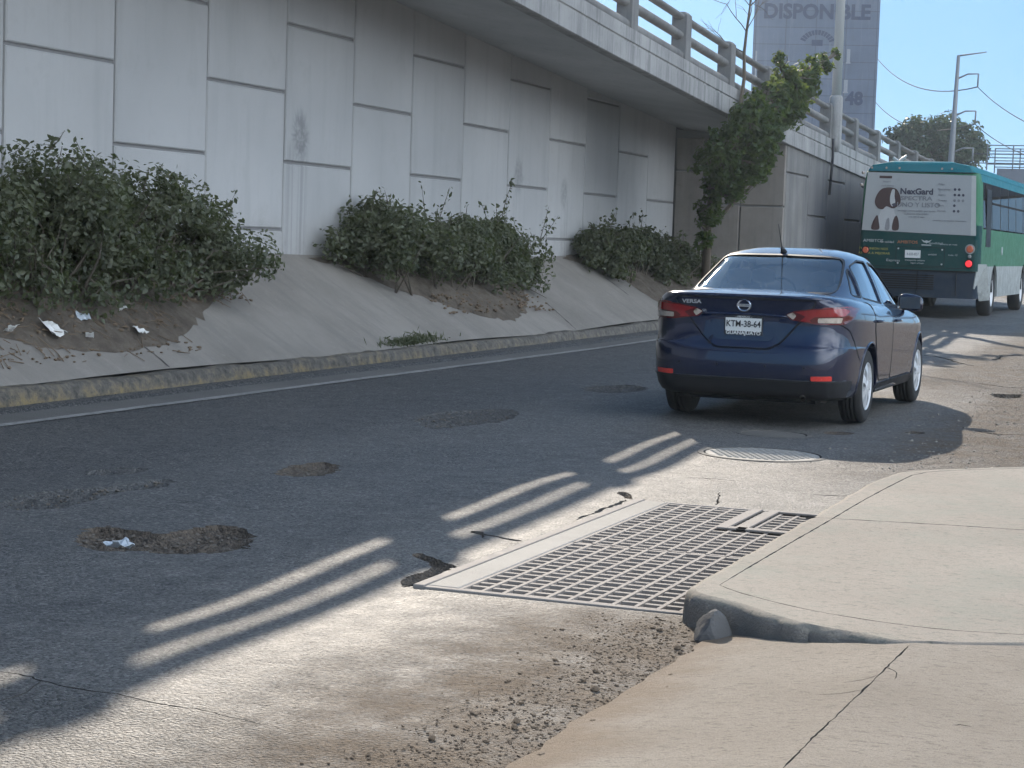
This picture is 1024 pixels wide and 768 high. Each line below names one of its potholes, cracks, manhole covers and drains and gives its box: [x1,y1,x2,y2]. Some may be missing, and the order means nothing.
pothole [400,553,457,588]
pothole [72,525,257,554]
manhole cover [697,446,828,463]
pothole [413,409,520,429]
crack [0,671,263,725]
pothole [274,462,341,477]
drain grate [406,498,818,615]
crack [474,531,521,541]
pothole [0,479,175,511]
